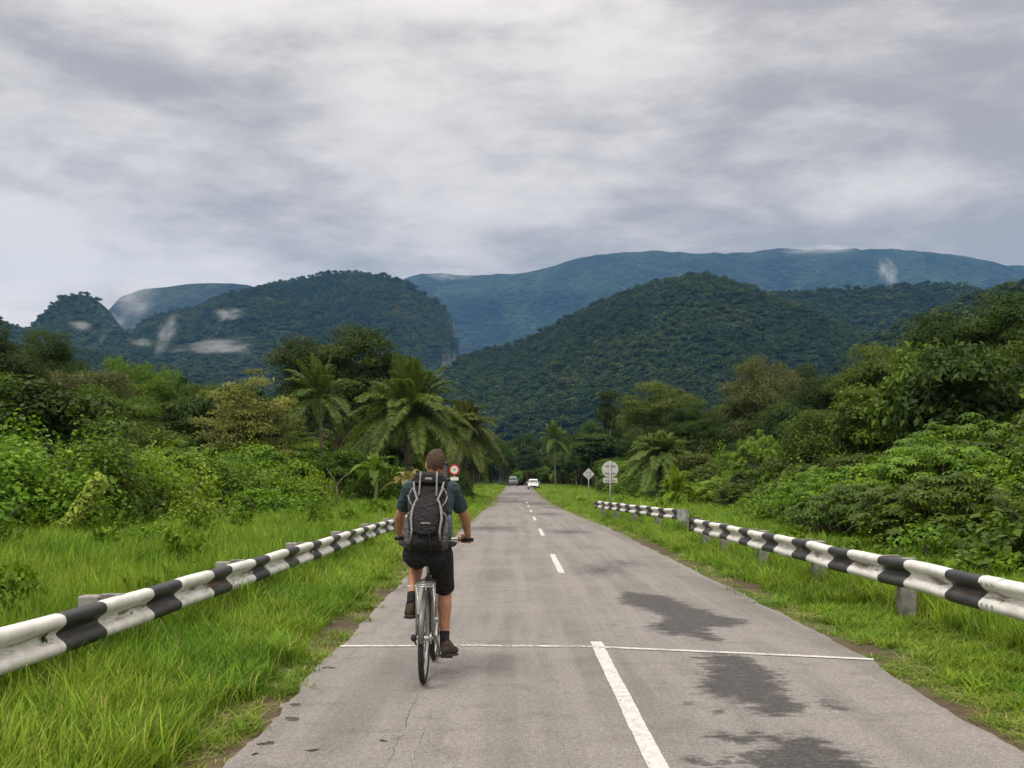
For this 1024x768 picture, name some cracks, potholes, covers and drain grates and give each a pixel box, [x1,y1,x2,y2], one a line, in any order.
crack [375,691,441,768]
